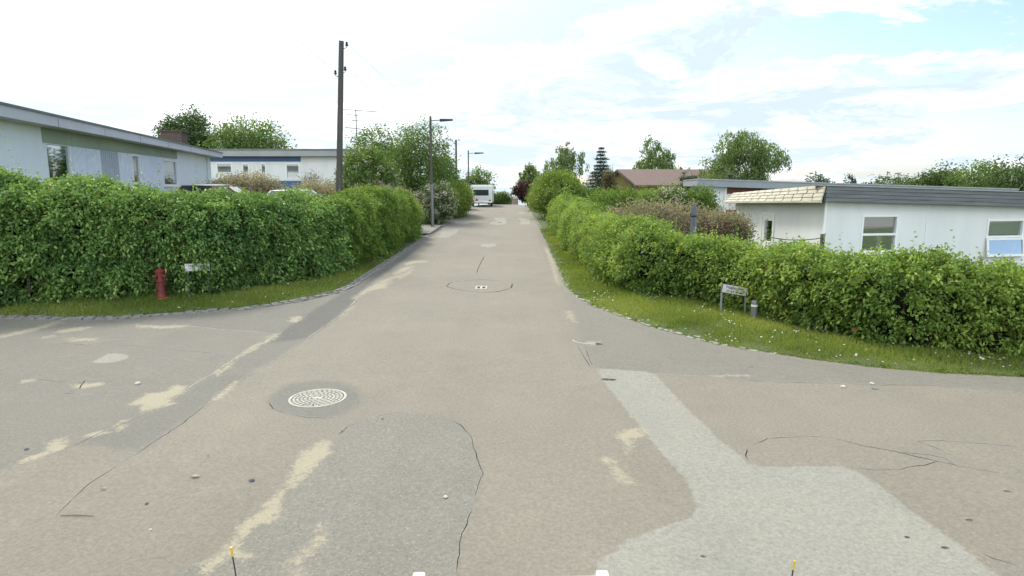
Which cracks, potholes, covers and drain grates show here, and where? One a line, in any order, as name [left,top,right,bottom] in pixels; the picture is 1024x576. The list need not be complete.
manhole cover [288,389,347,408]
crack [745,436,1017,474]
crack [446,256,513,292]
crack [39,290,370,527]
